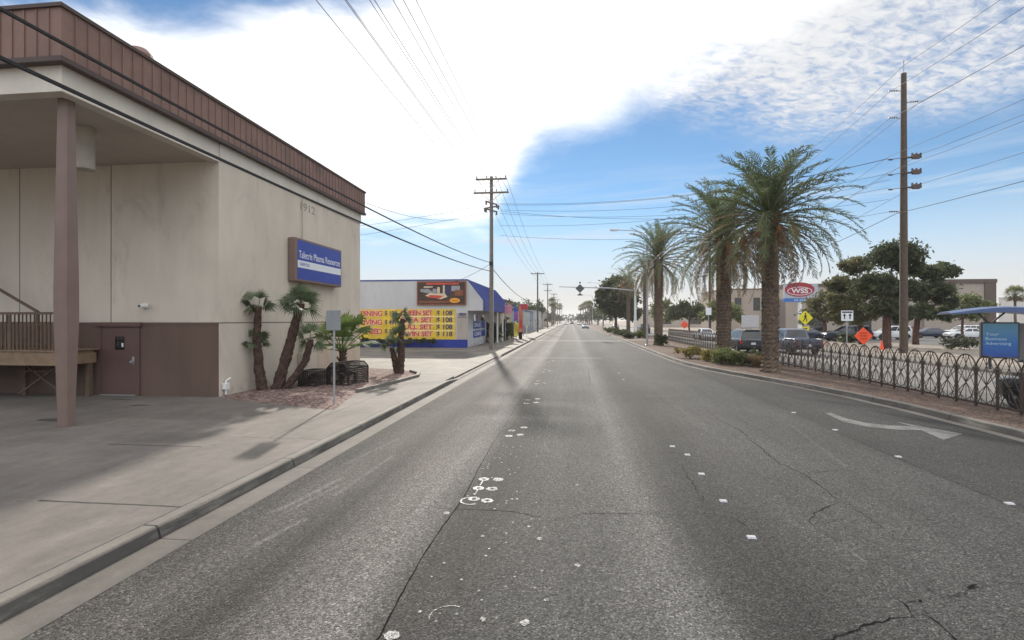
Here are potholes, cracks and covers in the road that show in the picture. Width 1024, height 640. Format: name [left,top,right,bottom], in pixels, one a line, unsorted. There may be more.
crack [376,376,751,640]
crack [822,578,1024,640]
crack [672,387,916,582]
